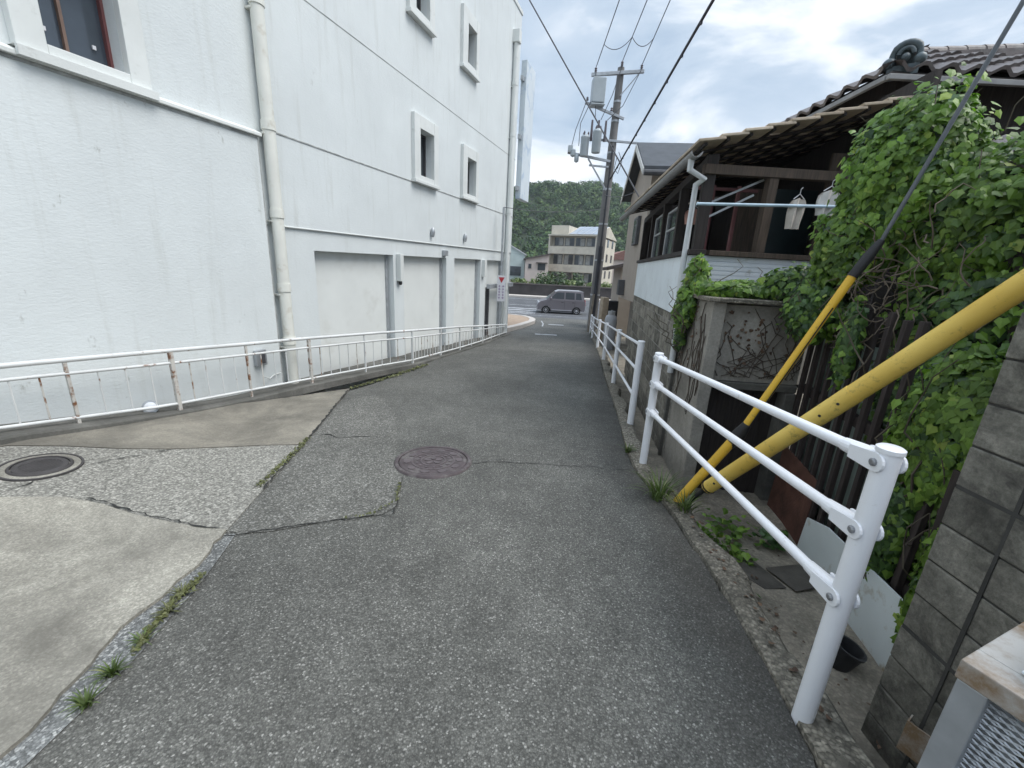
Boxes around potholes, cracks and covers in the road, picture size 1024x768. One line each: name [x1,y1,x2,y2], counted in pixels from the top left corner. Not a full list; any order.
crack [224,476,403,536]
manhole cover [394,446,472,479]
manhole cover [0,453,85,482]
crack [480,459,630,470]
crack [250,389,373,488]
